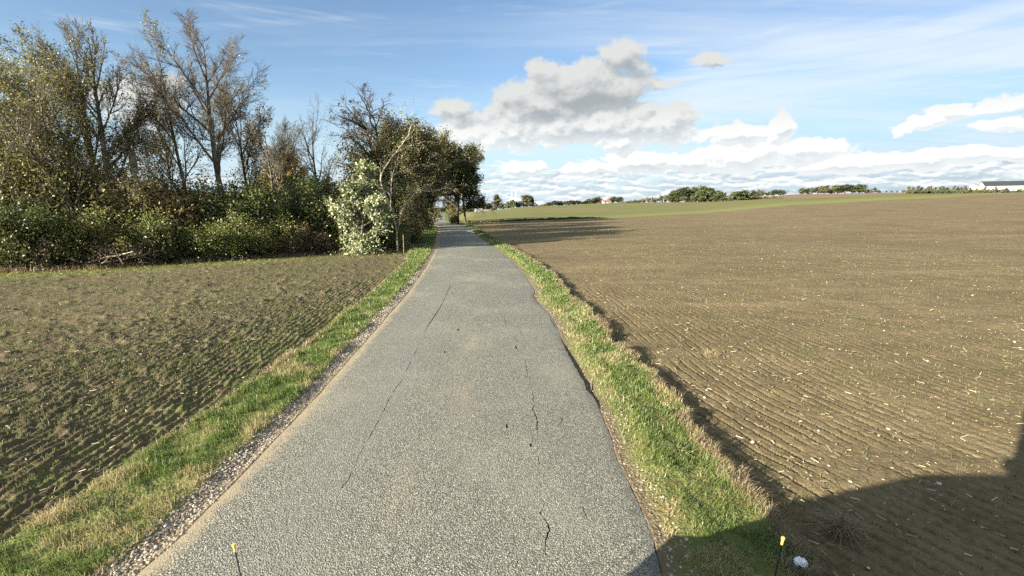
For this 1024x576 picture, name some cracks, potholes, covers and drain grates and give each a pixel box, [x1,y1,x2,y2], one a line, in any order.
crack [341,350,417,489]
crack [539,482,551,554]
crack [525,361,538,441]
